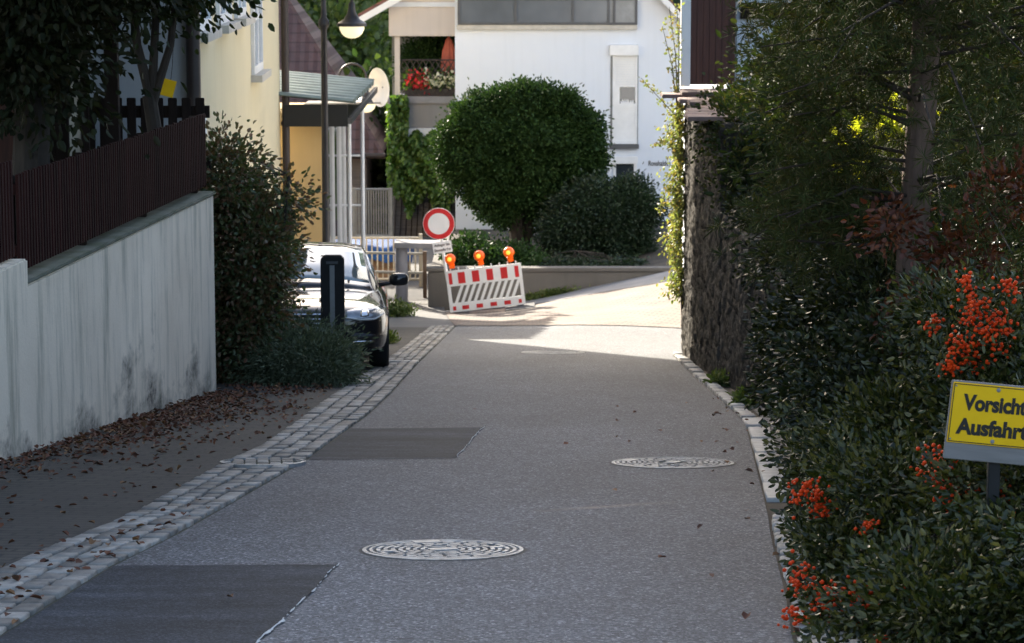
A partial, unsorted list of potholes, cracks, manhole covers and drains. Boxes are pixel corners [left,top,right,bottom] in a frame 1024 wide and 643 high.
manhole cover [609,457,737,469]
manhole cover [220,457,306,469]
manhole cover [358,539,527,561]
